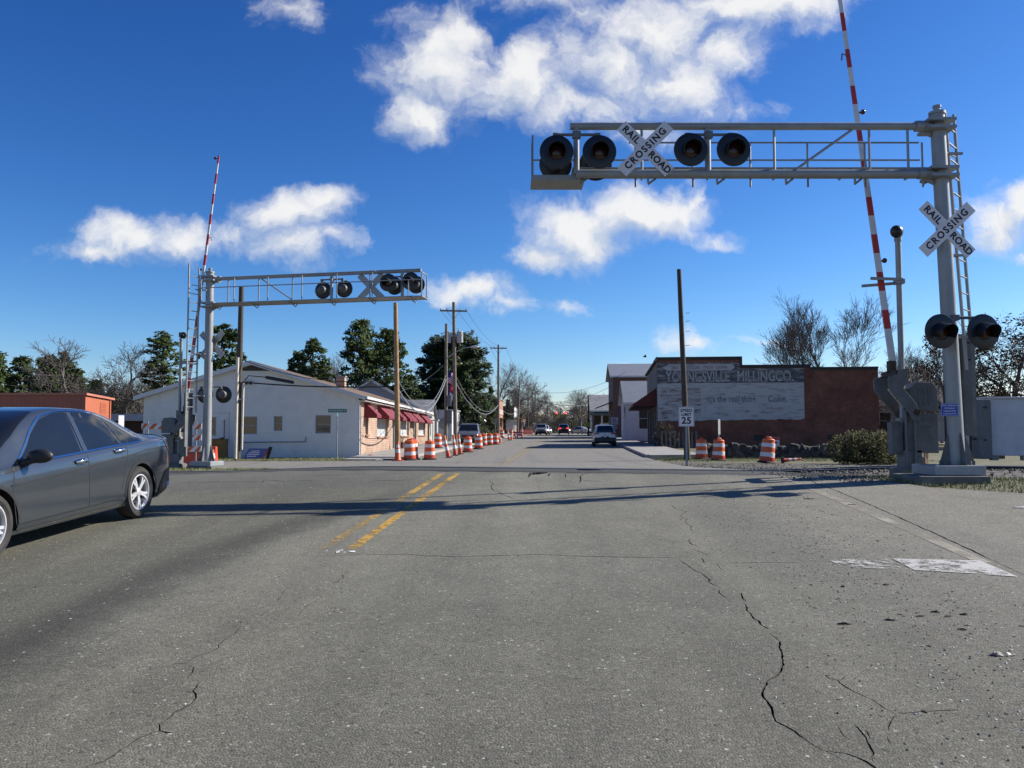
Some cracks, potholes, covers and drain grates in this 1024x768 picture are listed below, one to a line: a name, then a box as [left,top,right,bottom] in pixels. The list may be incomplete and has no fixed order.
crack [85,625,241,768]
crack [336,505,948,768]
